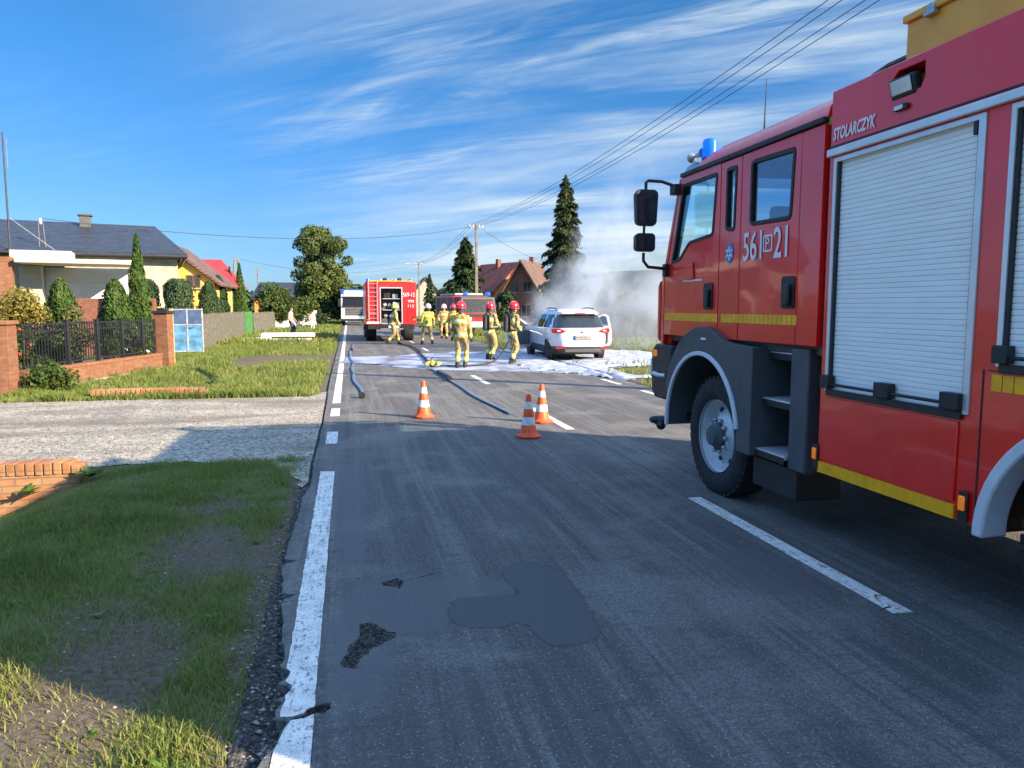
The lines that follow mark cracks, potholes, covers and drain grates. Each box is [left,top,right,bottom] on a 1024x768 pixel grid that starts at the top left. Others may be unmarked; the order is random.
pothole [340,622,396,669]
pothole [381,578,404,589]
